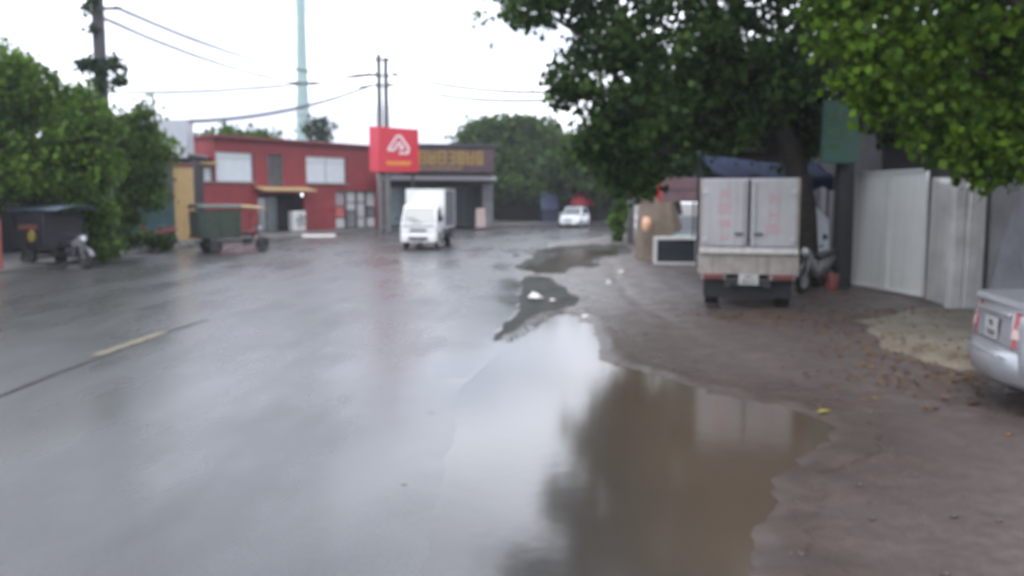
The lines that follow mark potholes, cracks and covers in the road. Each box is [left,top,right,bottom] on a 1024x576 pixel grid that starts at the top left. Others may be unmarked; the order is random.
pothole [494,276,580,342]
pothole [512,244,634,274]
